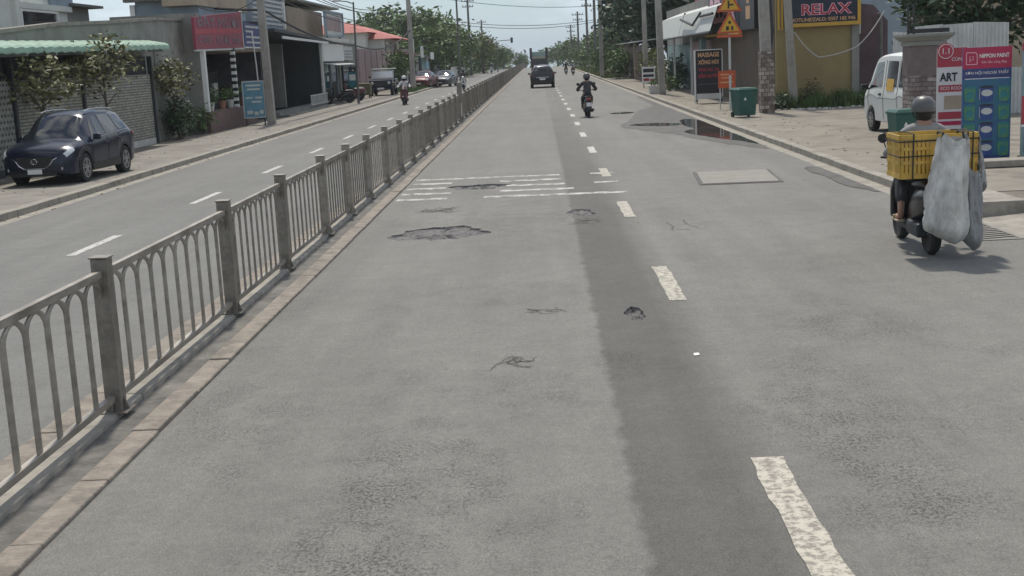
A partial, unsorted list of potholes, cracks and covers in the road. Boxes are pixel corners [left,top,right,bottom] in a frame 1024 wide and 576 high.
pothole [387,225,491,241]
manhole cover [693,169,784,185]
drain grate [982,222,1024,241]
crack [489,356,536,371]
pothole [624,306,646,320]
